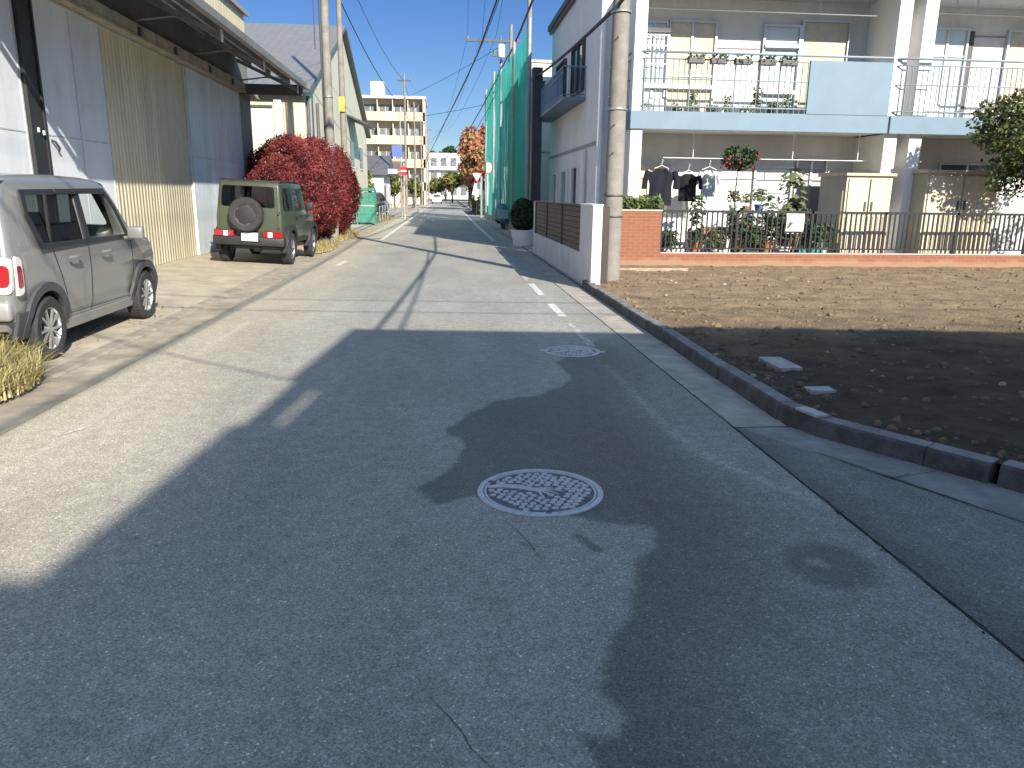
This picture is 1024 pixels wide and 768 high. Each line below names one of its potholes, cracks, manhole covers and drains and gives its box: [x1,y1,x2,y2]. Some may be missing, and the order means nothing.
crack [430,697,491,768]
manhole cover [540,346,605,357]
manhole cover [477,469,604,517]
